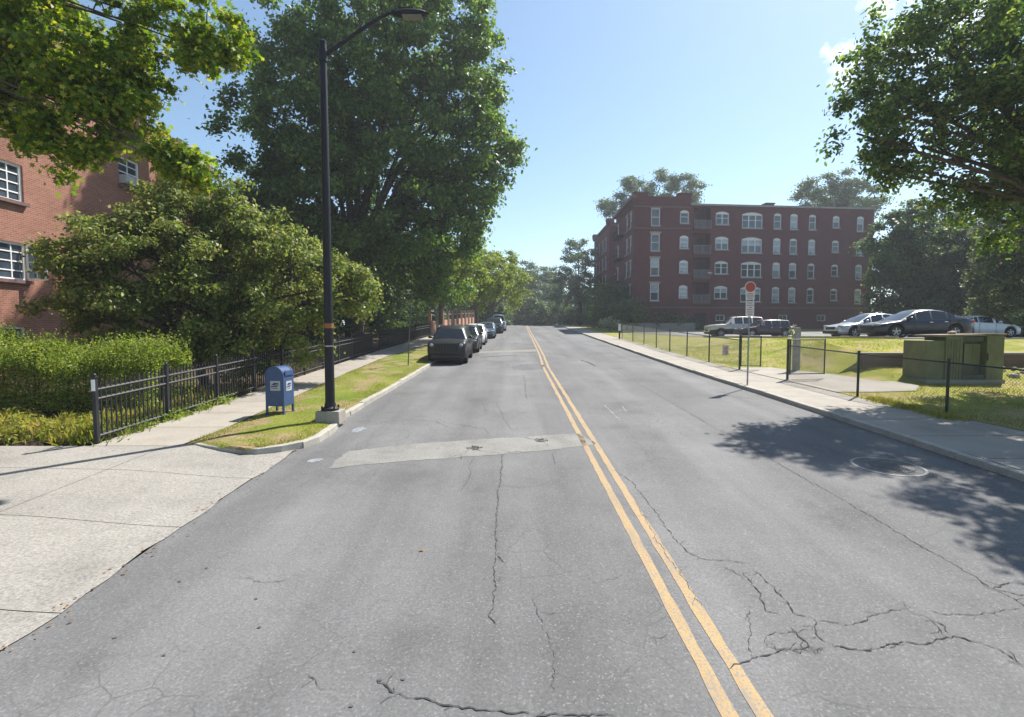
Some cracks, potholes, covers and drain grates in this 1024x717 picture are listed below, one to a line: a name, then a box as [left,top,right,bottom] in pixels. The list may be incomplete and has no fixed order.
crack [613,469,1024,669]
crack [385,405,574,623]
manhole cover [850,457,929,476]
crack [377,672,613,717]
crack [533,595,560,691]
